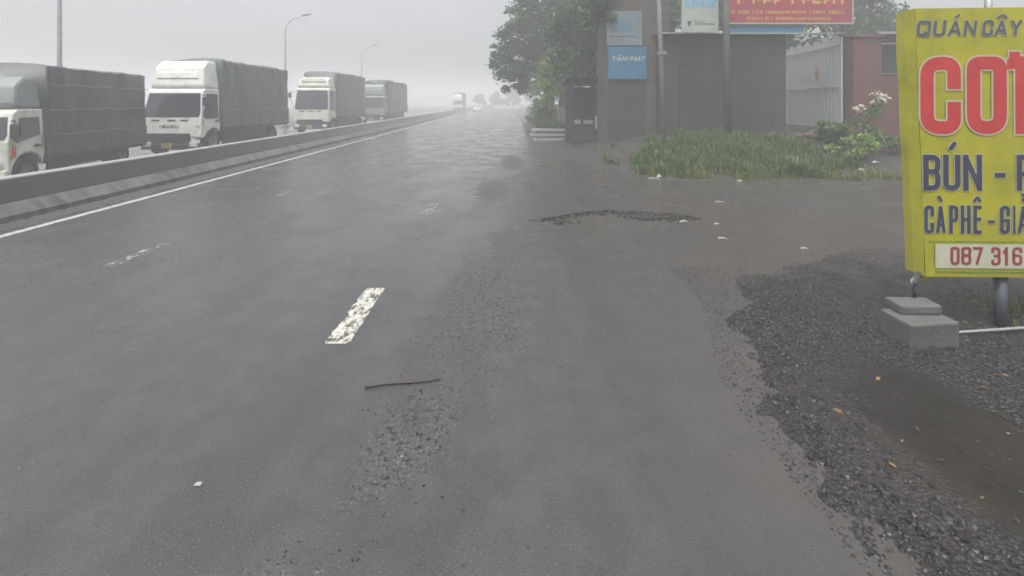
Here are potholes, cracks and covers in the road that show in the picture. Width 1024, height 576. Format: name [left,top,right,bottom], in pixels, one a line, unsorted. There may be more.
pothole [528,209,702,233]
